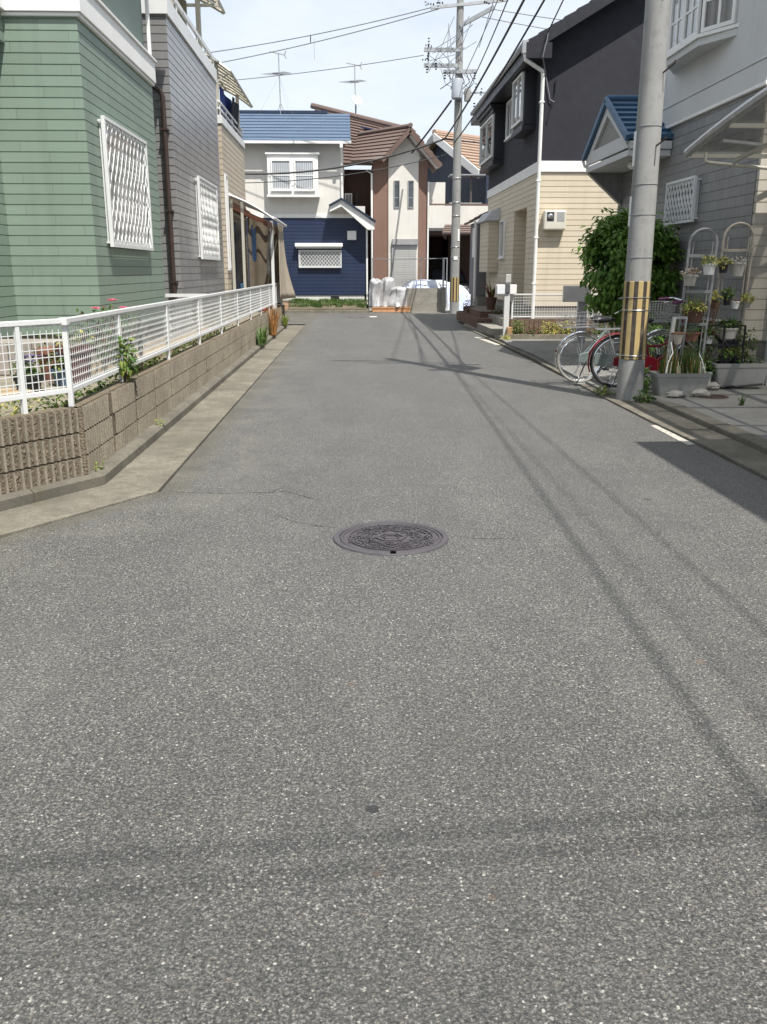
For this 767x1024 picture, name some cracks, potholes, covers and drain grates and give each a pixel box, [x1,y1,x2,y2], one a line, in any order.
manhole cover [333,521,449,556]
